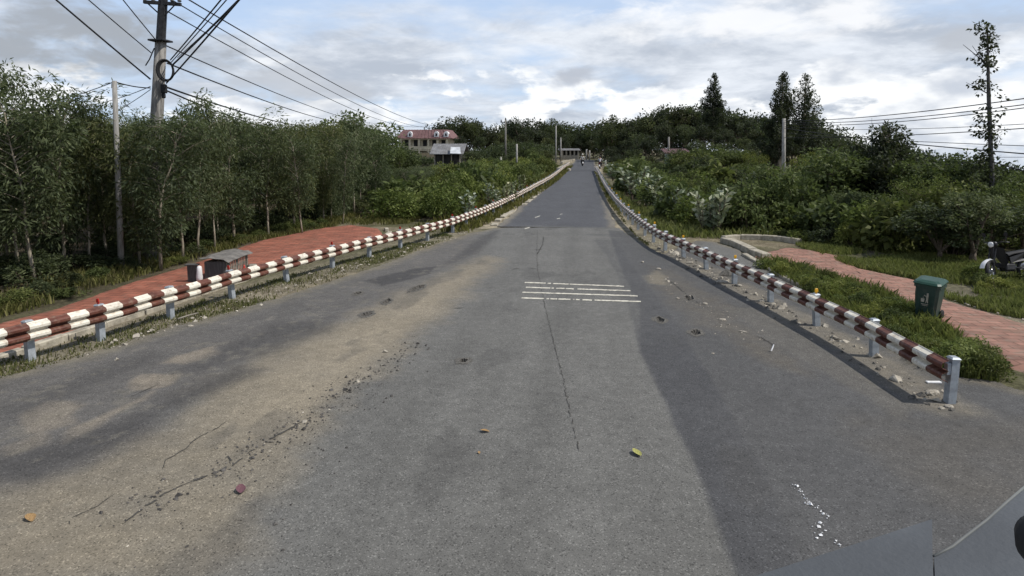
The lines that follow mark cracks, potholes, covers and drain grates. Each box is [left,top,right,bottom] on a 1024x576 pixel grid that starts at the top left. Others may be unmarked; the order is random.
pothole [686,328,705,337]
crack [64,421,302,531]
crack [512,232,579,449]
